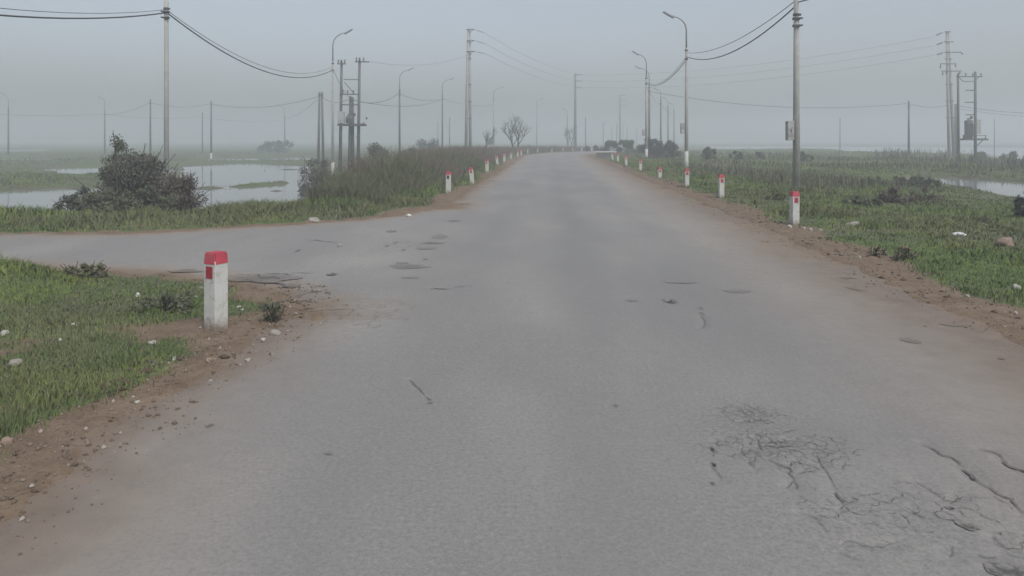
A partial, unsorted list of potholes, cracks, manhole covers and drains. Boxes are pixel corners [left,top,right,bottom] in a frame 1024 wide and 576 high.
crack [700,403,1024,560]
